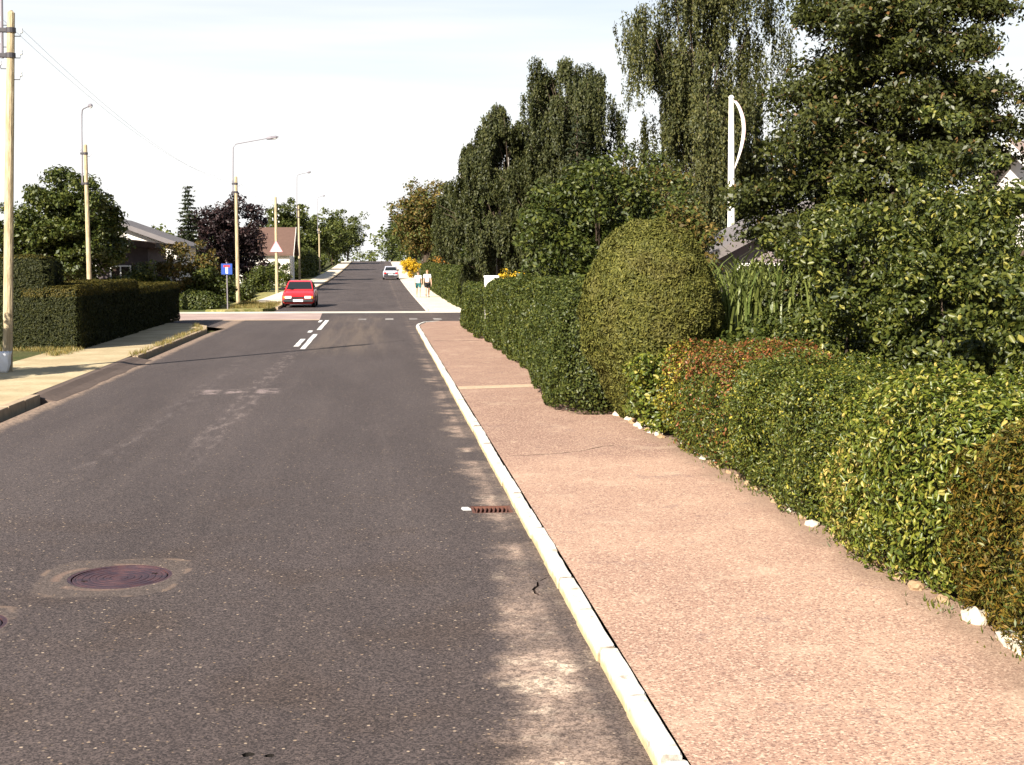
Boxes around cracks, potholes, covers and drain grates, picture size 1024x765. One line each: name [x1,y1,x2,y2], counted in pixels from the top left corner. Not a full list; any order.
manhole cover [67,565,172,589]
